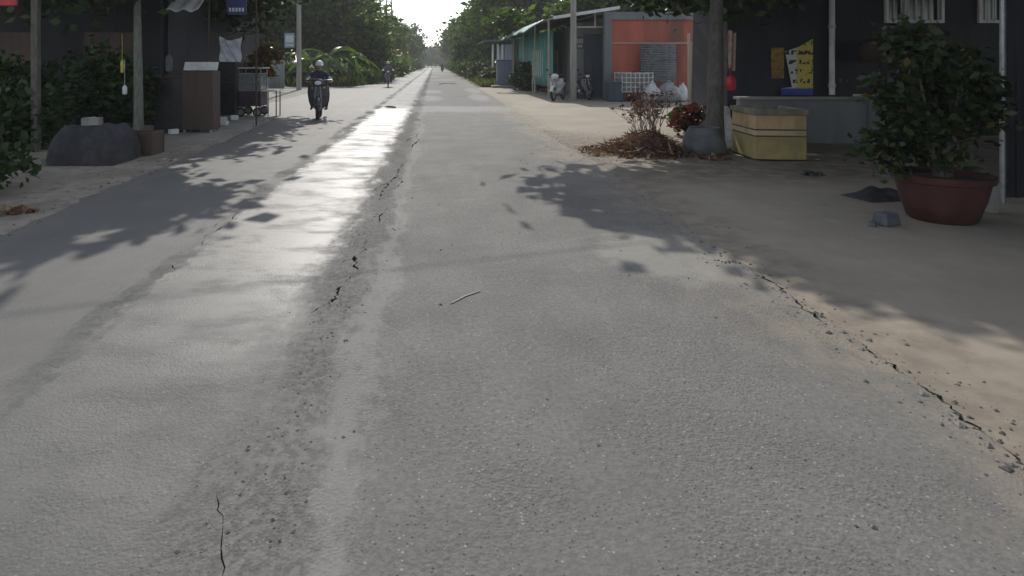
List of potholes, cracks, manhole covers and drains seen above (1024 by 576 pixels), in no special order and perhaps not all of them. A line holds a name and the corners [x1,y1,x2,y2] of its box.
crack [374,165,403,222]
crack [864,345,1024,465]
crack [748,266,828,328]
crack [208,495,225,576]
crack [311,241,367,313]
